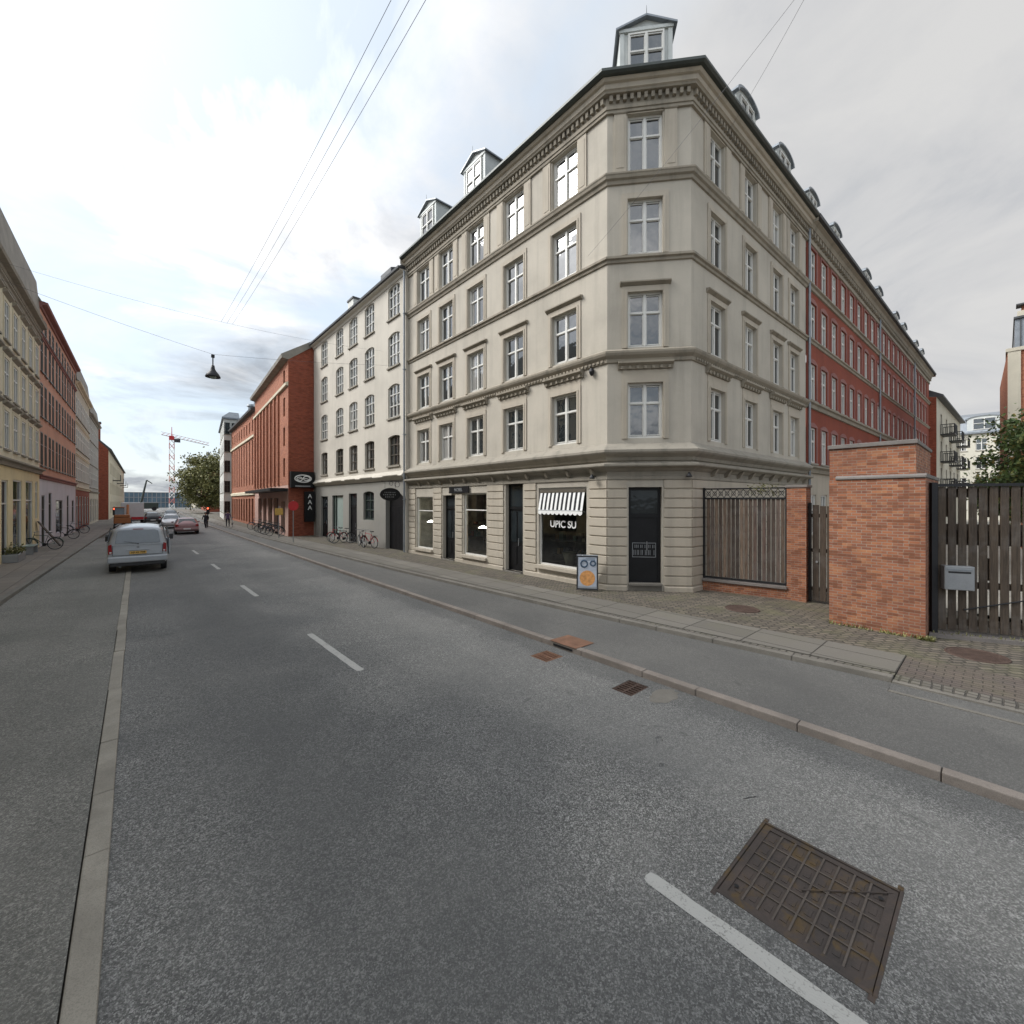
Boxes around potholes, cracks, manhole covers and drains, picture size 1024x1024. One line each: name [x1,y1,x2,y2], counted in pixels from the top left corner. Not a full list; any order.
manhole cover [944,647,1012,664]
manhole cover [725,605,760,613]
drain grate [531,651,563,662]
manhole cover [710,818,904,1004]
drain grate [612,680,648,696]
